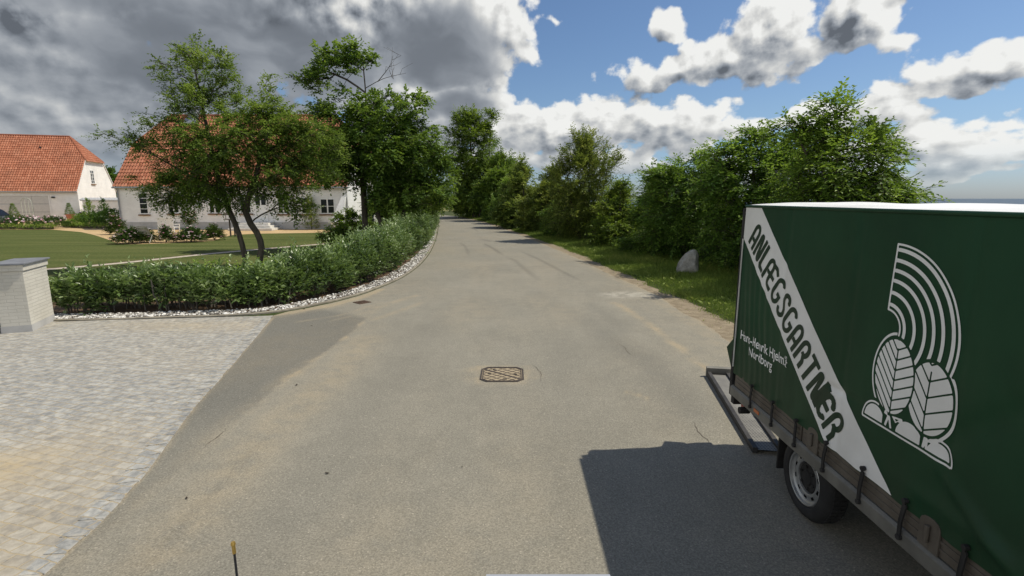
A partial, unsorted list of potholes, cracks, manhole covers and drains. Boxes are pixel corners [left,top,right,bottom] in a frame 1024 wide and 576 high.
manhole cover [480,367,524,382]
